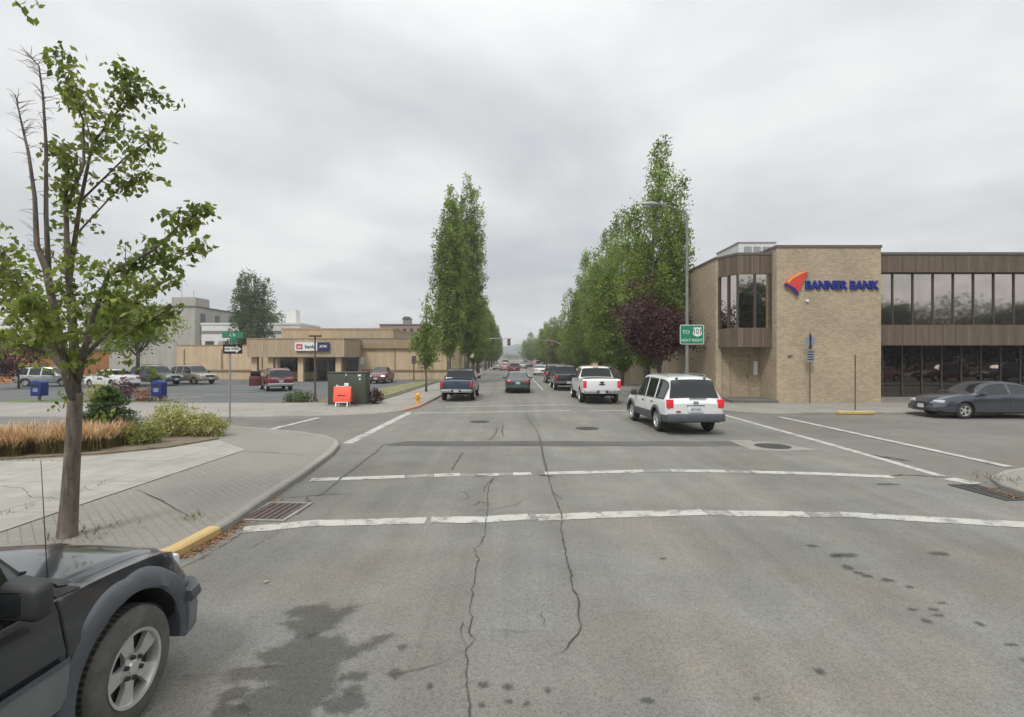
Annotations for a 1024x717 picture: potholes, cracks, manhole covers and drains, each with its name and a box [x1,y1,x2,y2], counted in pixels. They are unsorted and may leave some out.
drain grate [948,484,1024,501]
crack [526,414,582,655]
crack [390,477,532,717]
drain grate [242,501,313,522]
manhole cover [734,442,818,451]
